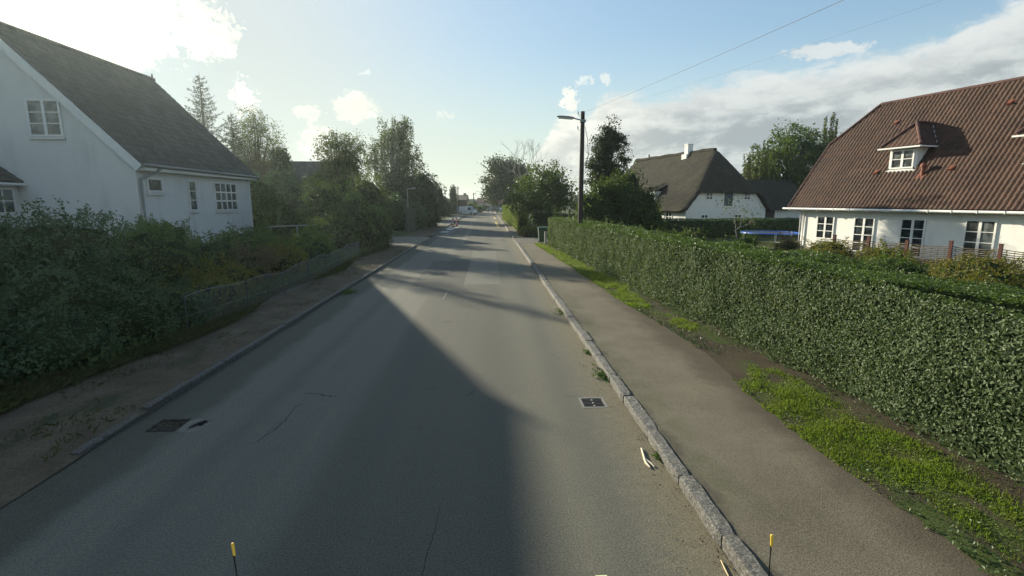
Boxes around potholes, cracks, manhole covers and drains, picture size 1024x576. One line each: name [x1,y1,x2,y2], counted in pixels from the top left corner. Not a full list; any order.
crack [253,393,336,444]
drain grate [145,418,191,432]
drain grate [578,397,609,408]
